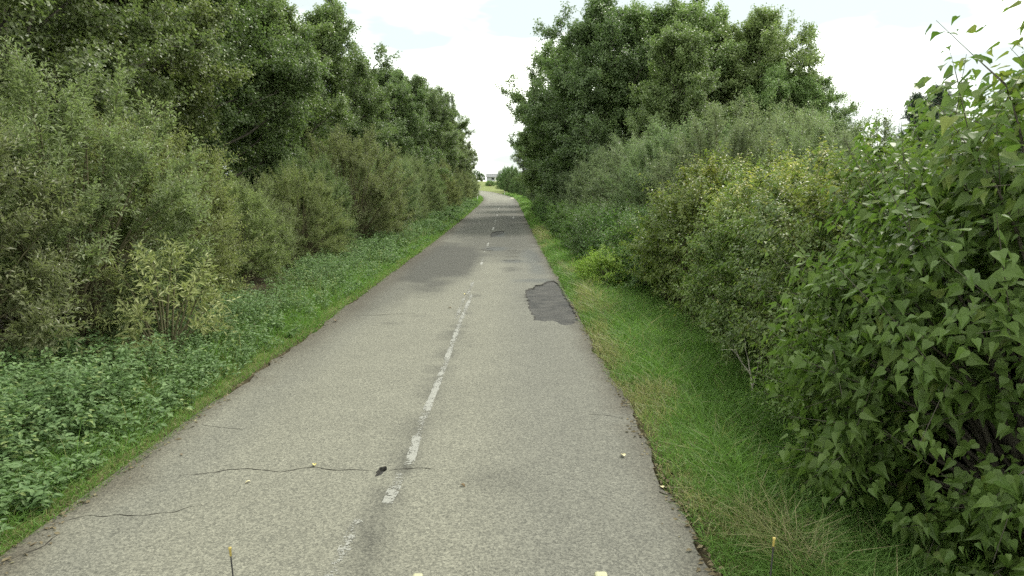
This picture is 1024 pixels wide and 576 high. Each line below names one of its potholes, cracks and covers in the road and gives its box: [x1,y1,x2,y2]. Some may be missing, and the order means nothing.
crack [179,467,431,476]
crack [1,505,202,565]
